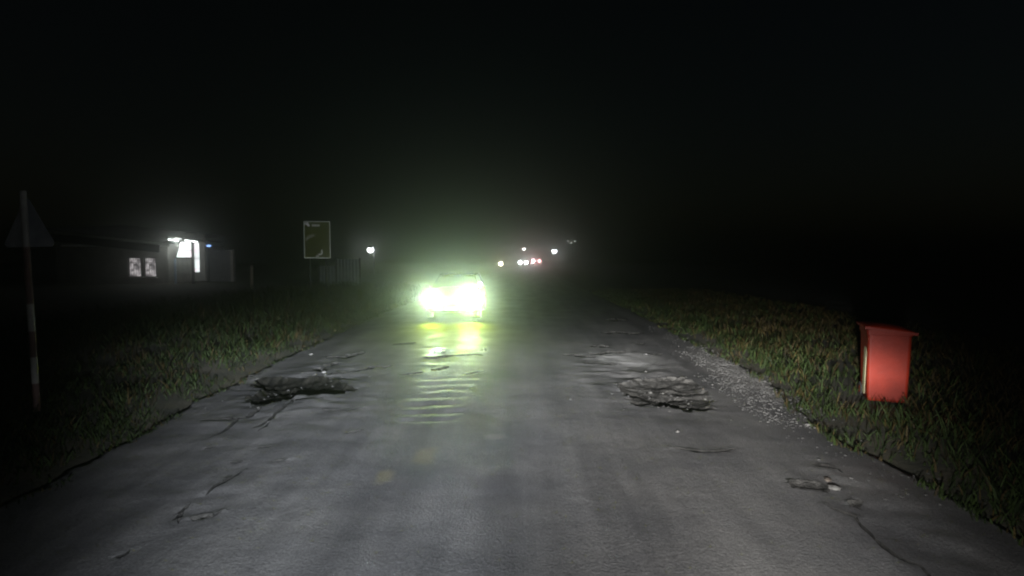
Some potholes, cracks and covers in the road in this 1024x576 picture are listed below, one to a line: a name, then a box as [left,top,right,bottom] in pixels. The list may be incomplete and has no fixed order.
pothole [847,498,864,508]
crack [828,505,931,576]
pothole [245,376,358,405]
crack [171,399,297,524]
pothole [618,377,716,412]
pothole [787,479,830,493]
crack [813,464,844,474]
